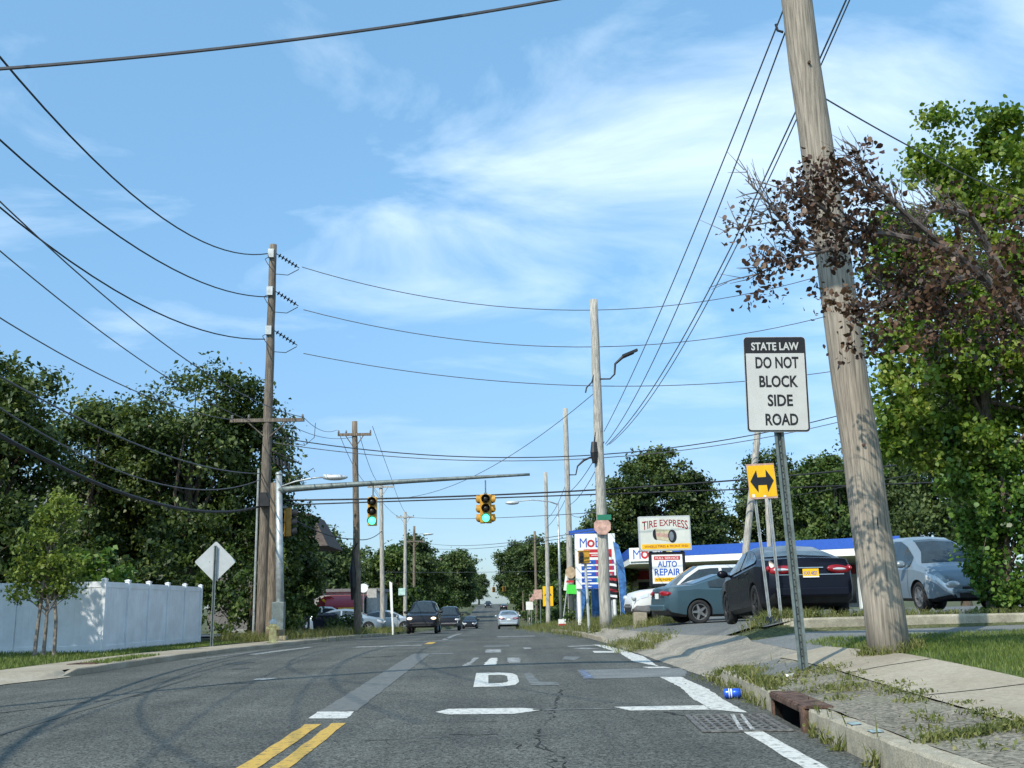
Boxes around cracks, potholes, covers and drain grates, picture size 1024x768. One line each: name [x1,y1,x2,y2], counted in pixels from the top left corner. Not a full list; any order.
drain grate [685,713,794,733]
crack [515,689,567,768]
